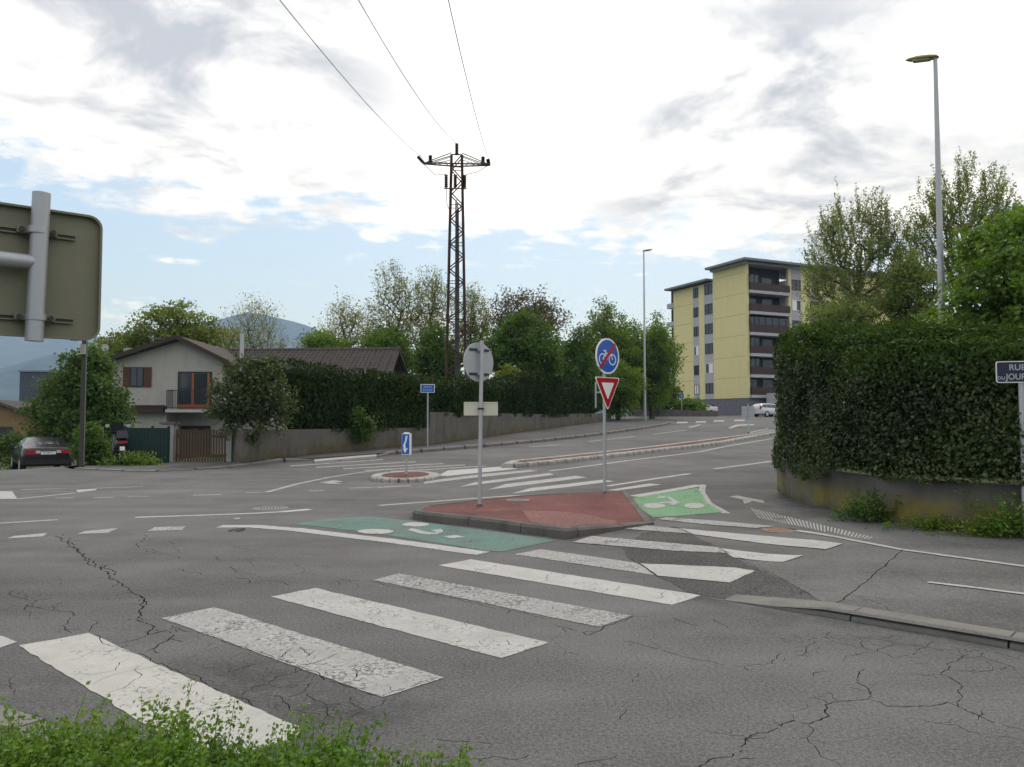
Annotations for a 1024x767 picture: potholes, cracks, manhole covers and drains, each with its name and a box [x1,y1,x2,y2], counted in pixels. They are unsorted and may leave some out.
crack [0,534,435,724]
crack [337,578,1024,767]
